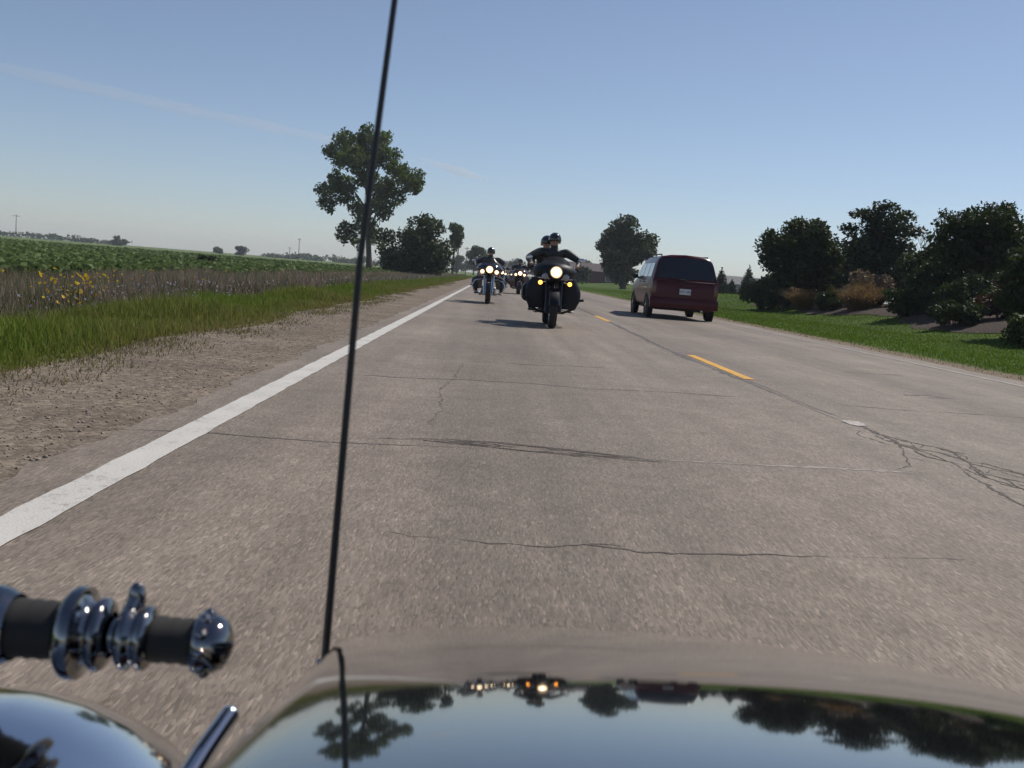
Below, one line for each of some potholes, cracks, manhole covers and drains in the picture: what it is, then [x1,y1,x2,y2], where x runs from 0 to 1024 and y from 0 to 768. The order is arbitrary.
crack [391,531,963,560]
crack [652,426,1024,507]
crack [63,365,748,464]
